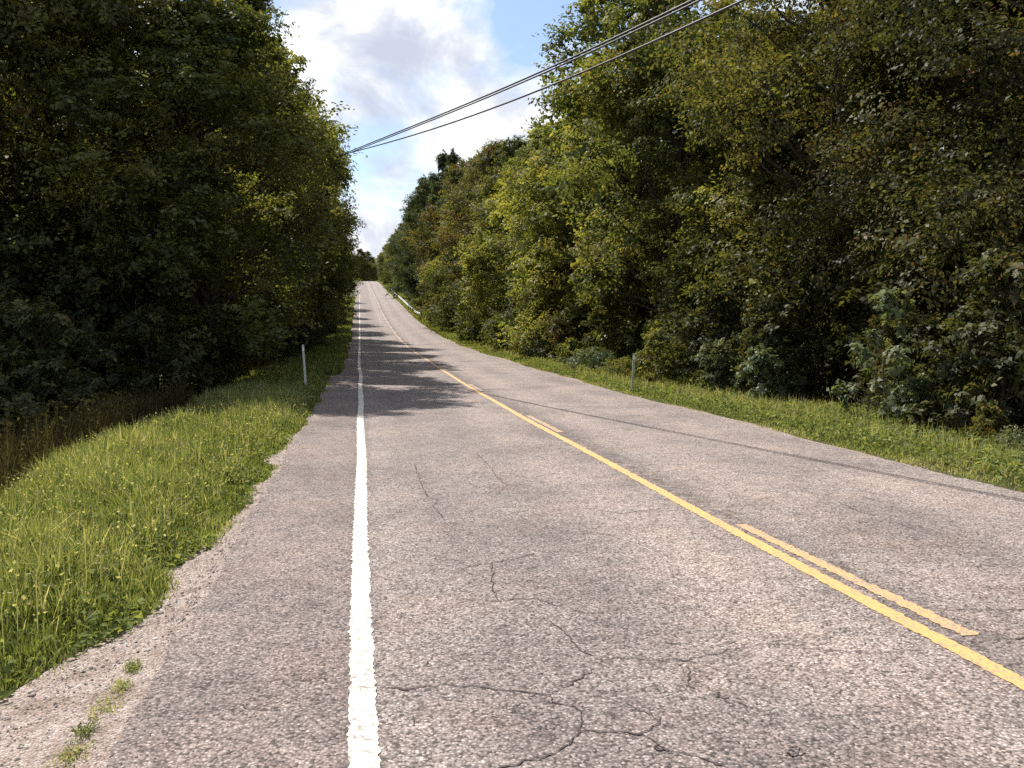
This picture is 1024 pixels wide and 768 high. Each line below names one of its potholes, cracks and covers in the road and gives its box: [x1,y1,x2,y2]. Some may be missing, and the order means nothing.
crack [381,554,922,768]
